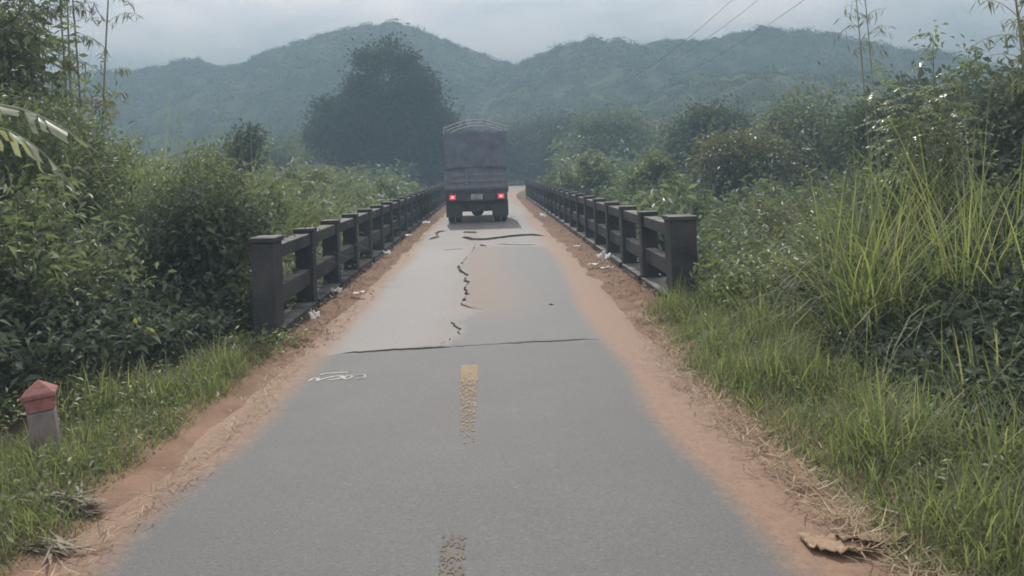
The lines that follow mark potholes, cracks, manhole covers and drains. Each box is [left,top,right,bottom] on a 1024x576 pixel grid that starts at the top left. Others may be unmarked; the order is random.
crack [333,231,586,355]
